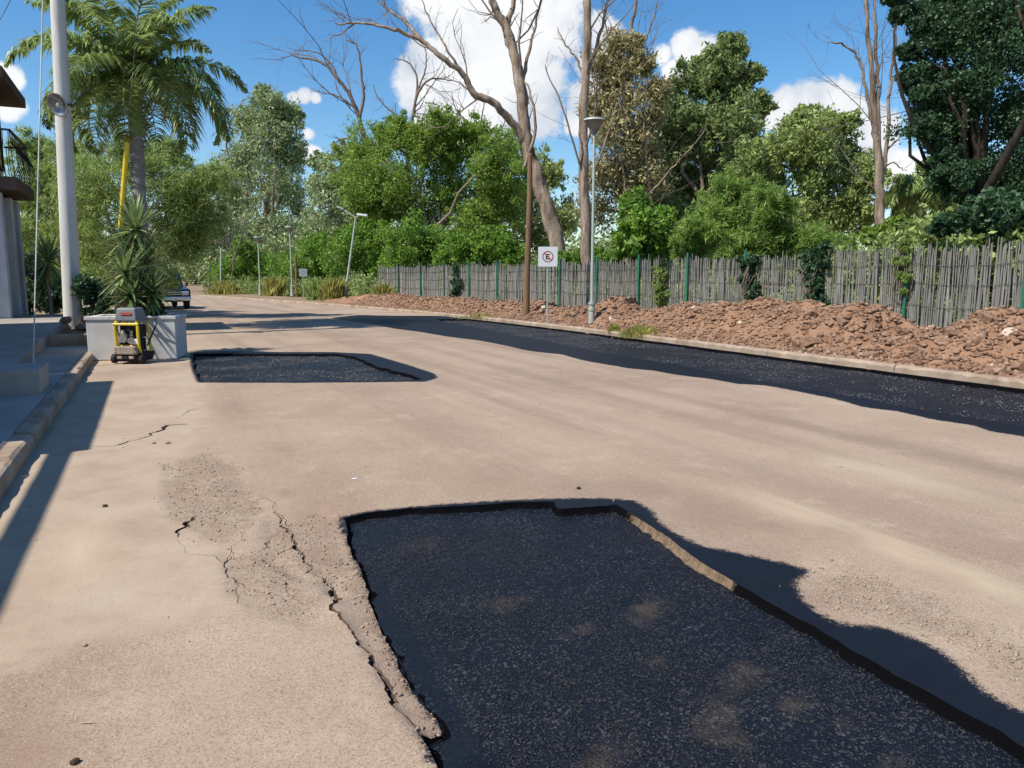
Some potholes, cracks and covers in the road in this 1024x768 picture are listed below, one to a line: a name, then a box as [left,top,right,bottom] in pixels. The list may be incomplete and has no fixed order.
crack [108,408,199,447]
crack [175,495,421,733]
